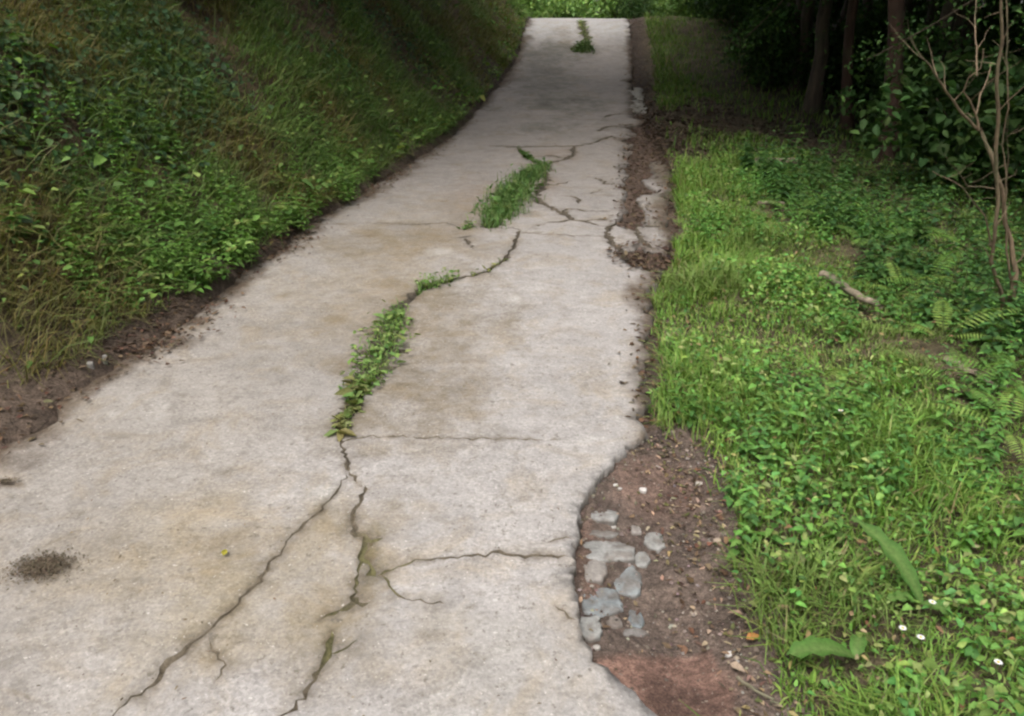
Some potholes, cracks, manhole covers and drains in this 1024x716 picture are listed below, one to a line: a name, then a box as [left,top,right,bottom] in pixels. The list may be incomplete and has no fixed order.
crack [319,114,661,435]
crack [112,434,571,716]
crack [577,21,591,53]
